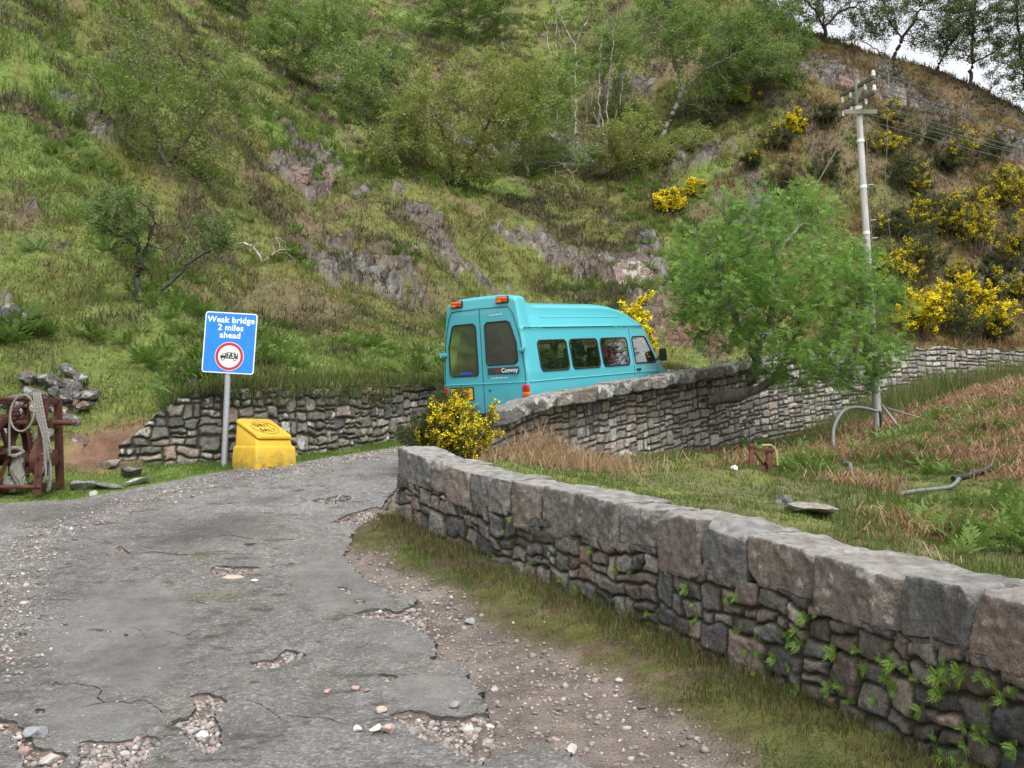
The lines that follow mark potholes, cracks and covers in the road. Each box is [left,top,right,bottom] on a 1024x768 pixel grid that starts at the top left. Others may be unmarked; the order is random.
pothole [312,495,351,505]
pothole [76,735,163,768]
pothole [390,710,497,765]
pothole [250,649,307,669]
crack [240,699,349,726]
pothole [172,692,228,756]
pothole [355,604,429,635]
pothole [0,717,69,768]
pothole [210,565,260,578]
crack [51,682,172,734]
pothole [378,673,398,681]
pothole [333,507,393,525]
